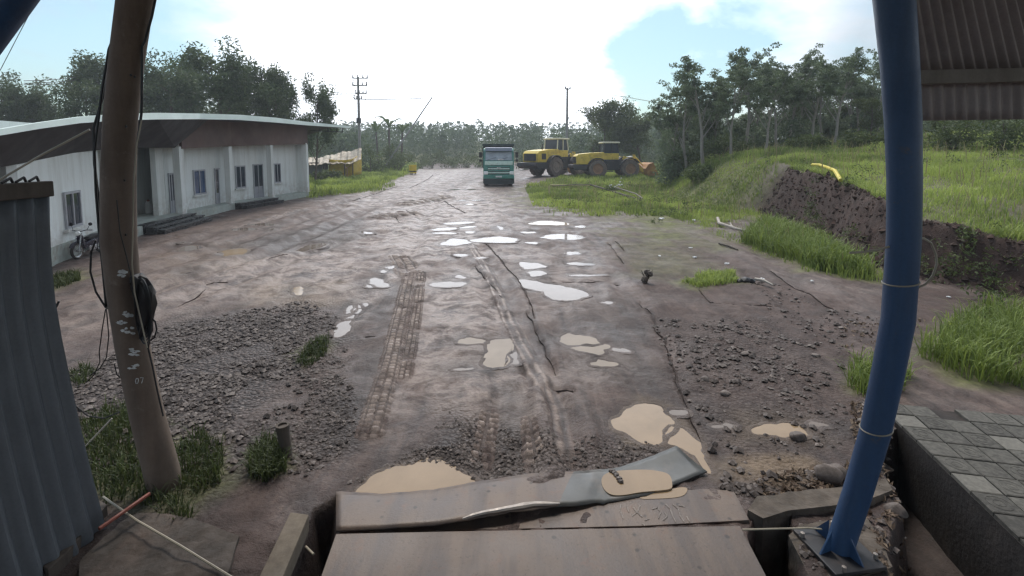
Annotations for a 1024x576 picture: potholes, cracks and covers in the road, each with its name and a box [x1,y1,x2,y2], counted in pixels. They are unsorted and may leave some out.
pothole [586,357,621,369]
pothole [478,338,516,370]
pothole [608,401,681,447]
pothole [608,346,635,355]
pothole [556,332,604,347]
pothole [568,343,613,357]
crack [639,303,701,441]
crack [475,244,573,392]
pothole [353,456,482,494]
pothole [663,407,694,419]
